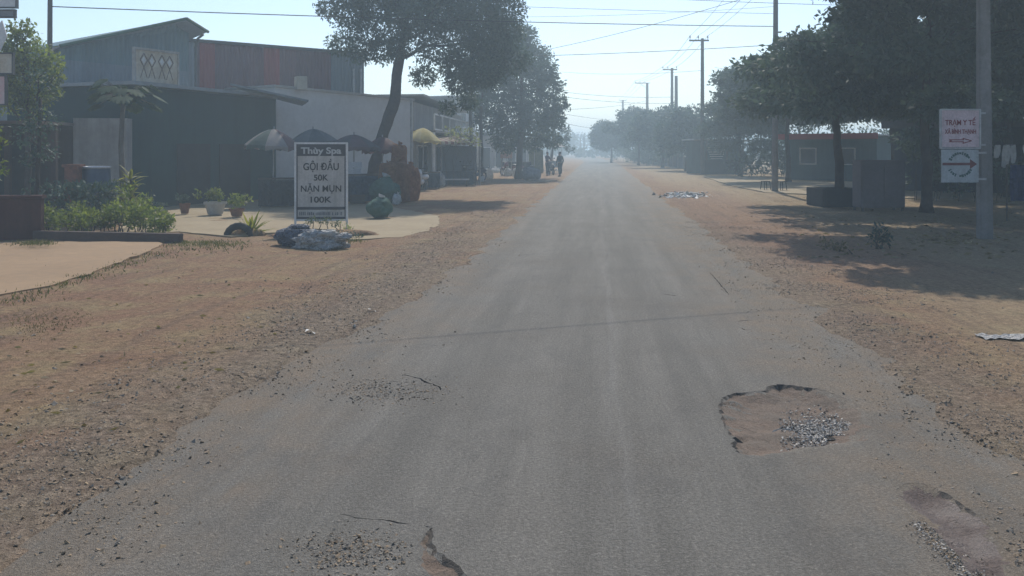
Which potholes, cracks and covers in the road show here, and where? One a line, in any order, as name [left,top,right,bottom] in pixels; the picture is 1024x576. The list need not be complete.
pothole [718,384,875,456]
pothole [895,482,1021,576]
pothole [401,528,467,576]
